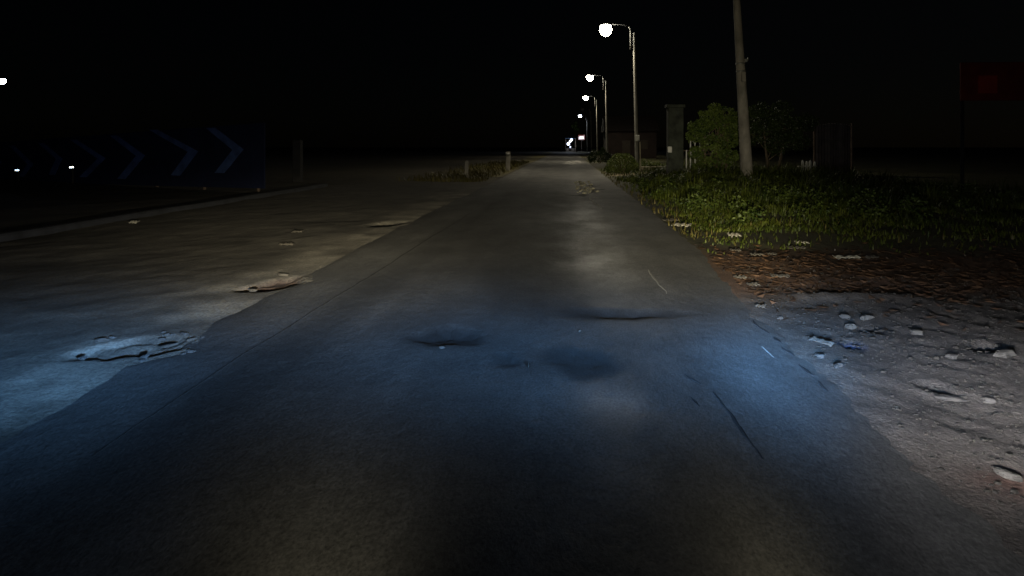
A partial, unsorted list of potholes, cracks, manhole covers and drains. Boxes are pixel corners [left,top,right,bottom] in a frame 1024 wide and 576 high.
pothole [541,306,734,323]
pothole [396,323,499,349]
crack [684,374,764,459]
pothole [228,275,308,294]
pothole [529,340,635,388]
pothole [52,334,199,364]
